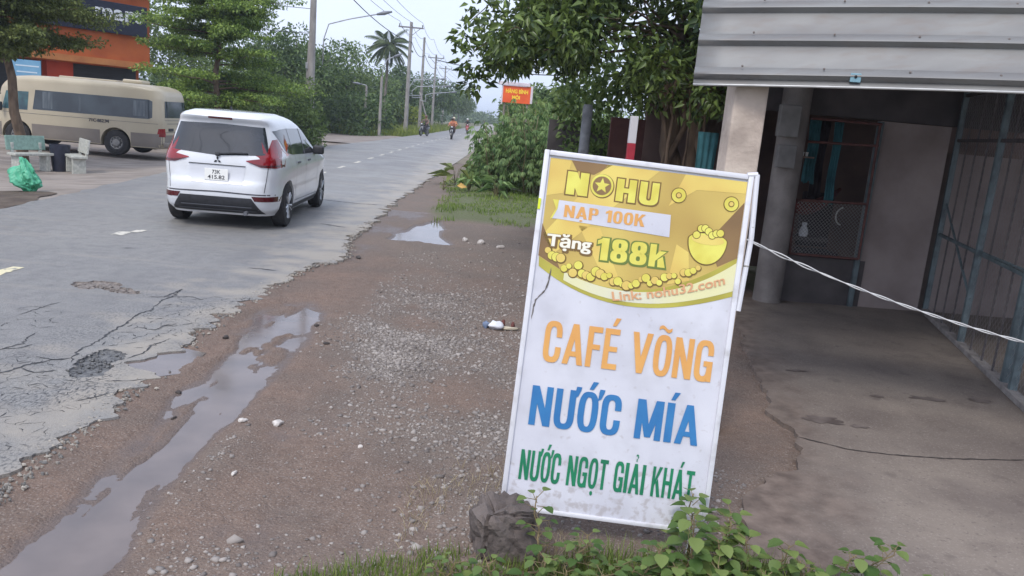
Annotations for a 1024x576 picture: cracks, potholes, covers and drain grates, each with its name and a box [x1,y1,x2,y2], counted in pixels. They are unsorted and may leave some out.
crack [797,436,1024,460]
crack [0,289,250,449]
pothole [68,349,128,378]
